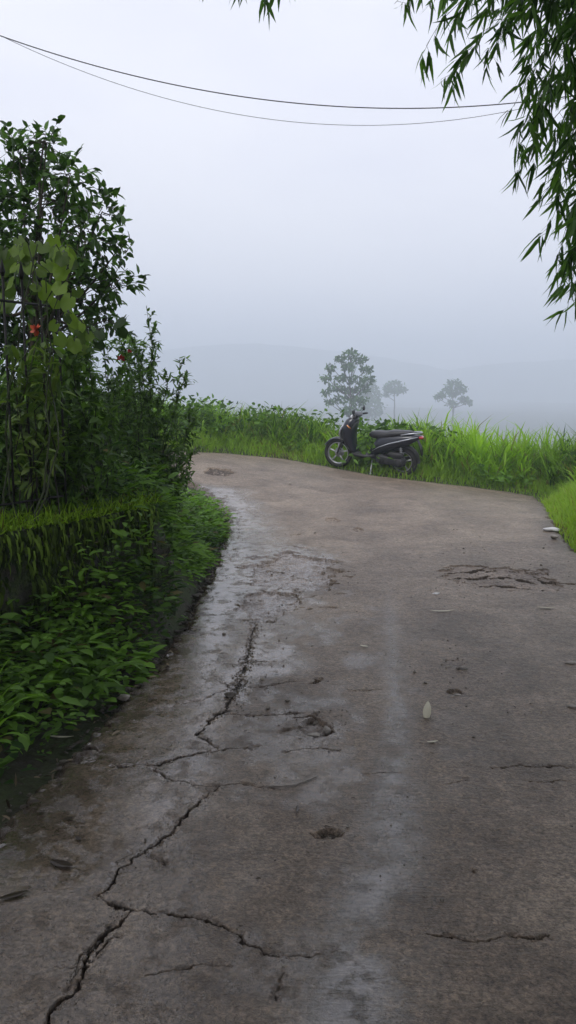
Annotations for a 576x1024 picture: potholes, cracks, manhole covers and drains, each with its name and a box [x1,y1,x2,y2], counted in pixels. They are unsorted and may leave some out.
crack [416,926,564,950]
crack [33,620,412,1024]
pothole [199,466,241,478]
pothole [272,712,344,740]
pothole [300,824,358,844]
crack [435,762,576,788]
